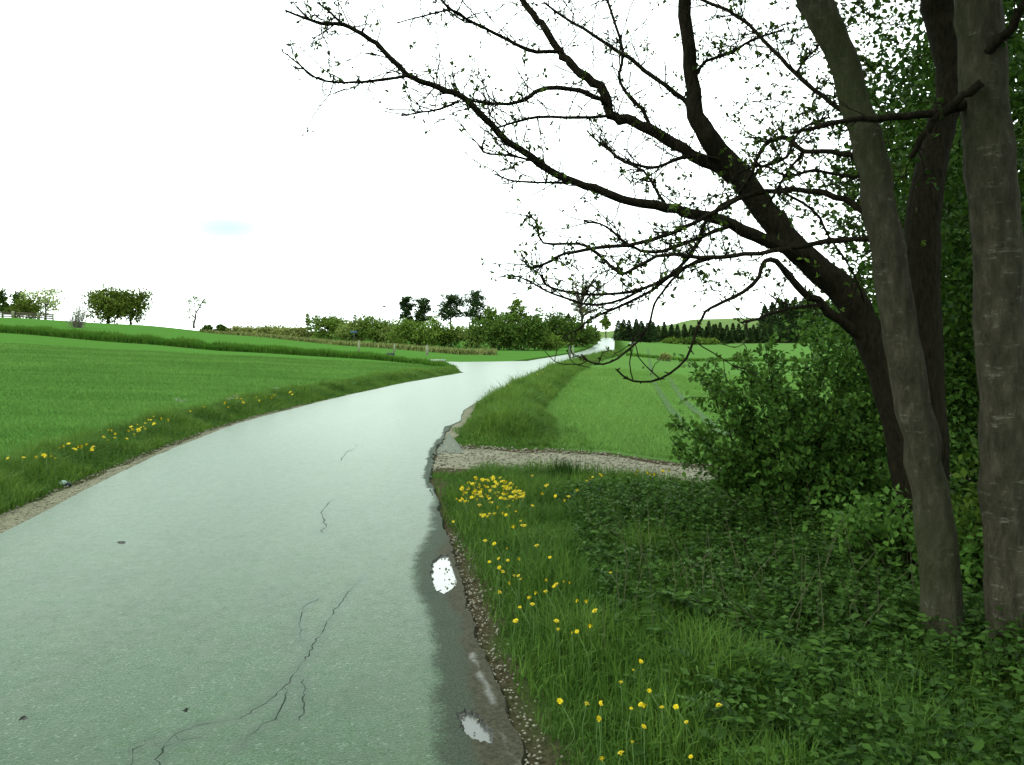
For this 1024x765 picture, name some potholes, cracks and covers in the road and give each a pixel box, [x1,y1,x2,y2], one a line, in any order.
pothole [430,554,458,594]
crack [131,579,361,765]
pothole [456,708,495,743]
